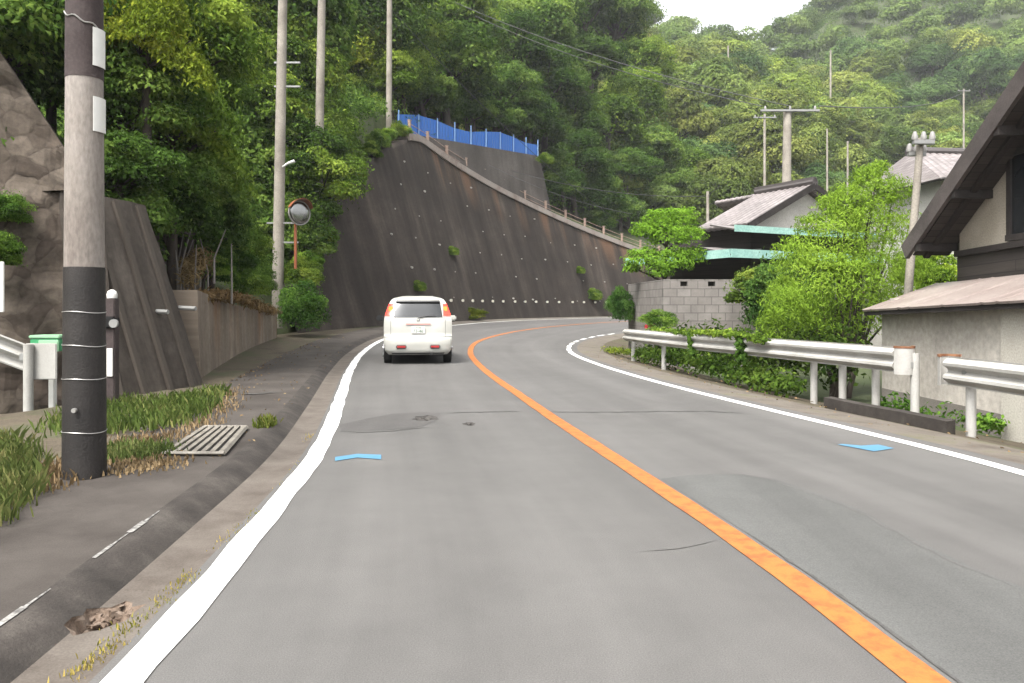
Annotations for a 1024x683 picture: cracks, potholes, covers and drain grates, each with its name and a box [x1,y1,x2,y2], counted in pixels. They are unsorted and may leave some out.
crack [624,538,720,553]
drain grate [161,425,248,455]
